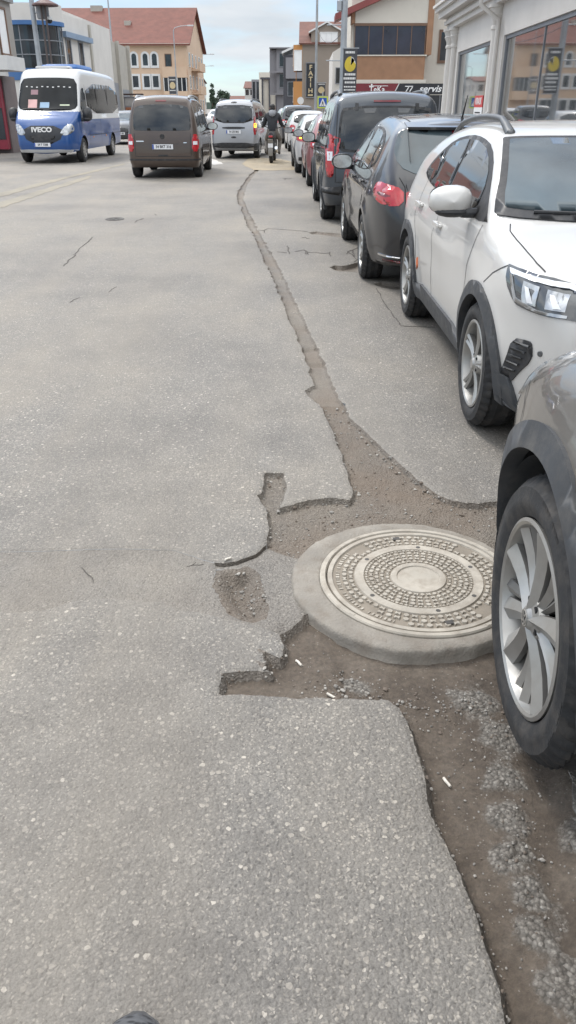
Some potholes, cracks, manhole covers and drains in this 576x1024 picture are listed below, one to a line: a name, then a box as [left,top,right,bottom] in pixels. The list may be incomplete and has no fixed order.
crack [237,170,358,407]
pothole [212,566,269,623]
pothole [218,614,576,1024]
manhole cover [291,524,495,665]
